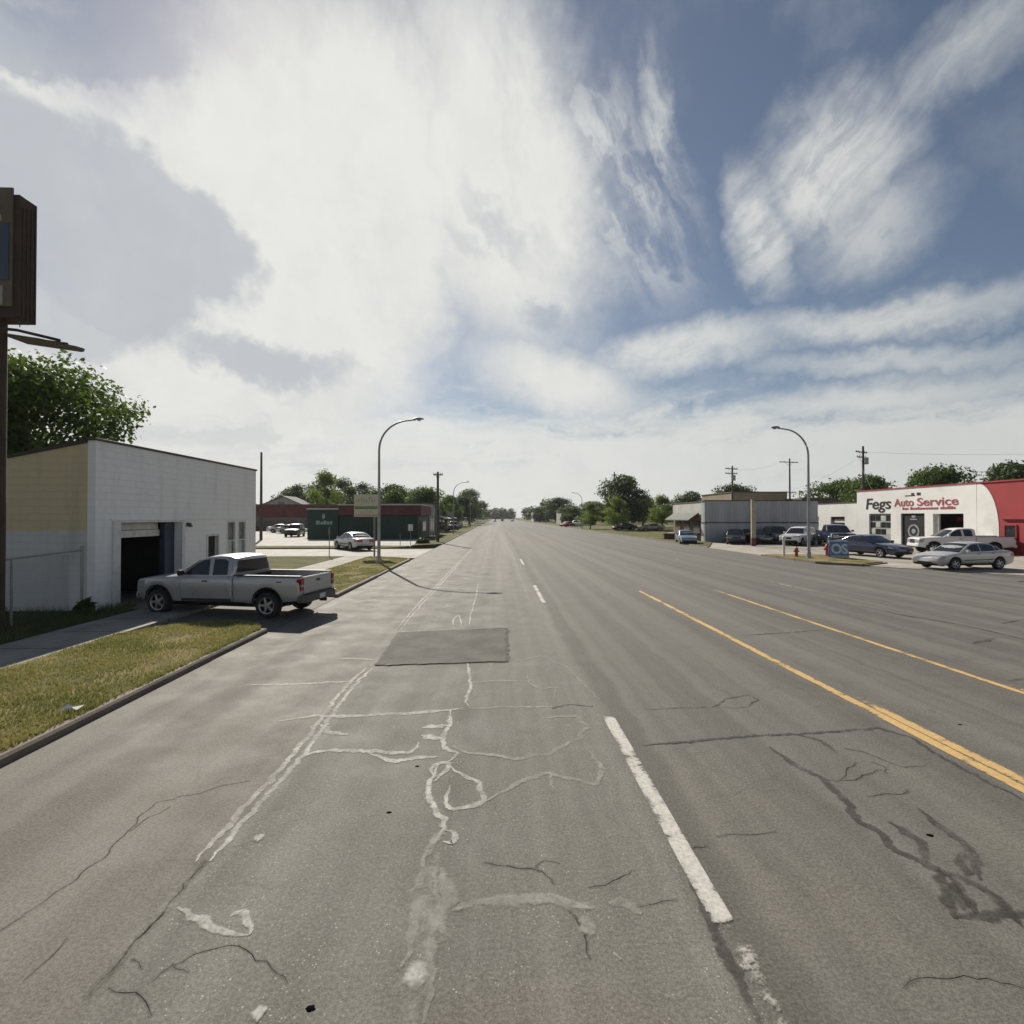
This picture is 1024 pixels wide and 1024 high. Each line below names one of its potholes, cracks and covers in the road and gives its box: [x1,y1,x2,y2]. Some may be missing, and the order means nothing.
crack [832,749,926,797]
crack [490,861,633,958]
crack [903,975,1022,988]
crack [2,658,604,1016]
